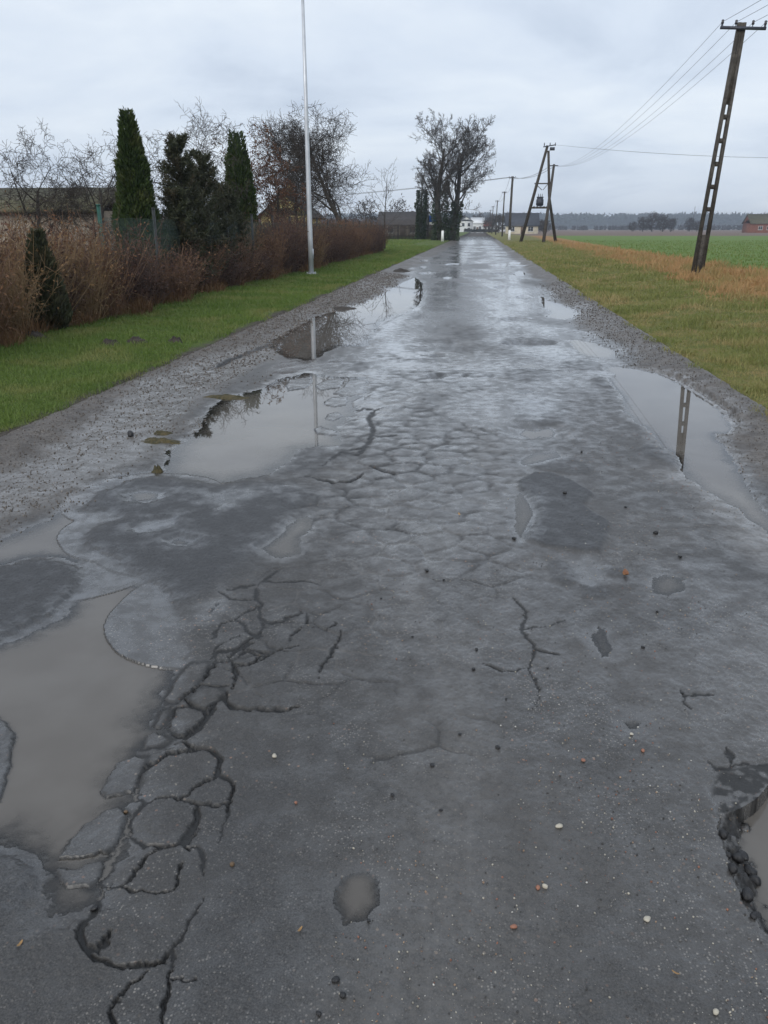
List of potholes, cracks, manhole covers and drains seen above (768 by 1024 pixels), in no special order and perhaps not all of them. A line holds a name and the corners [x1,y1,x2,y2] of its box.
crack [679,689,719,711]
crack [72,236,568,1024]
pothole [701,755,768,941]
